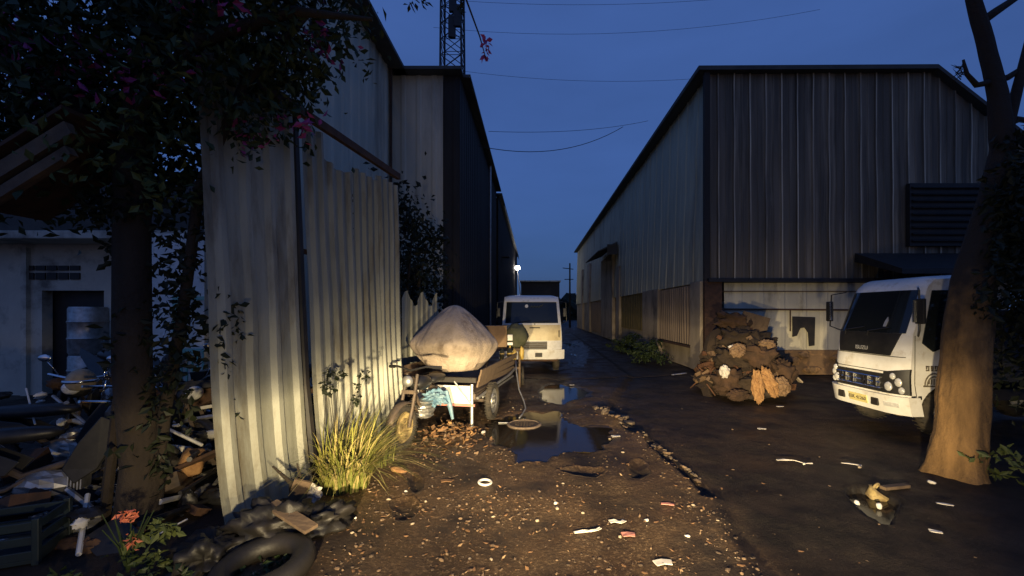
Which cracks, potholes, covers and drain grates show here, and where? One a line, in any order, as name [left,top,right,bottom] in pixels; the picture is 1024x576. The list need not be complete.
pothole [479,411,613,463]
pothole [627,457,652,480]
manhole cover [507,419,541,429]
pothole [843,486,902,525]
pothole [556,464,608,478]
pothole [537,383,593,405]
